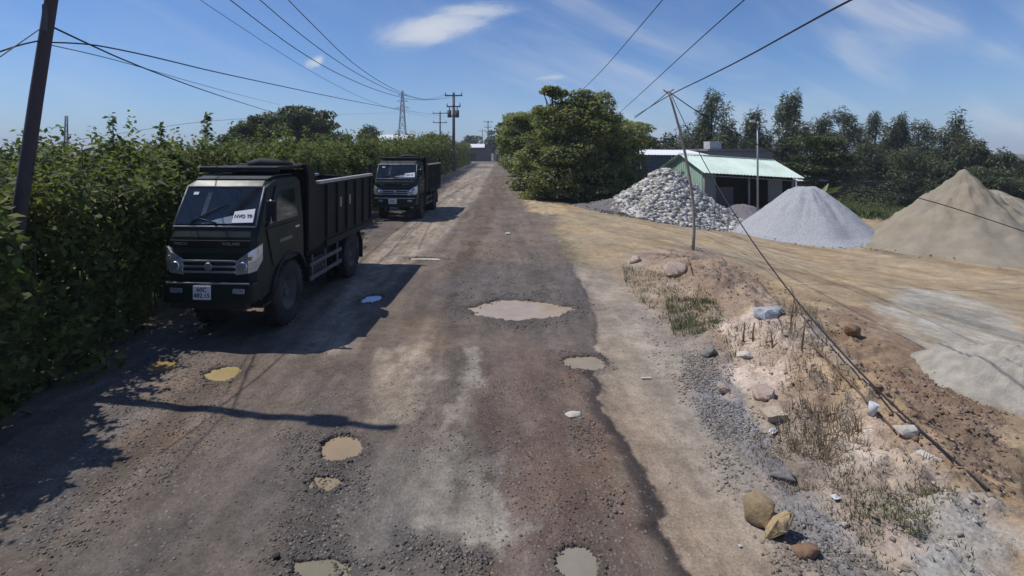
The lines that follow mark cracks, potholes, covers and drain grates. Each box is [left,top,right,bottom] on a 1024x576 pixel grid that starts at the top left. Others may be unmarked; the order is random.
pothole [551,352,615,376]
pothole [192,363,252,385]
pothole [544,537,609,576]
pothole [309,428,373,468]
pothole [444,295,602,326]
pothole [135,357,190,374]
pothole [295,472,351,495]
pothole [275,552,370,576]
pothole [356,293,387,305]
